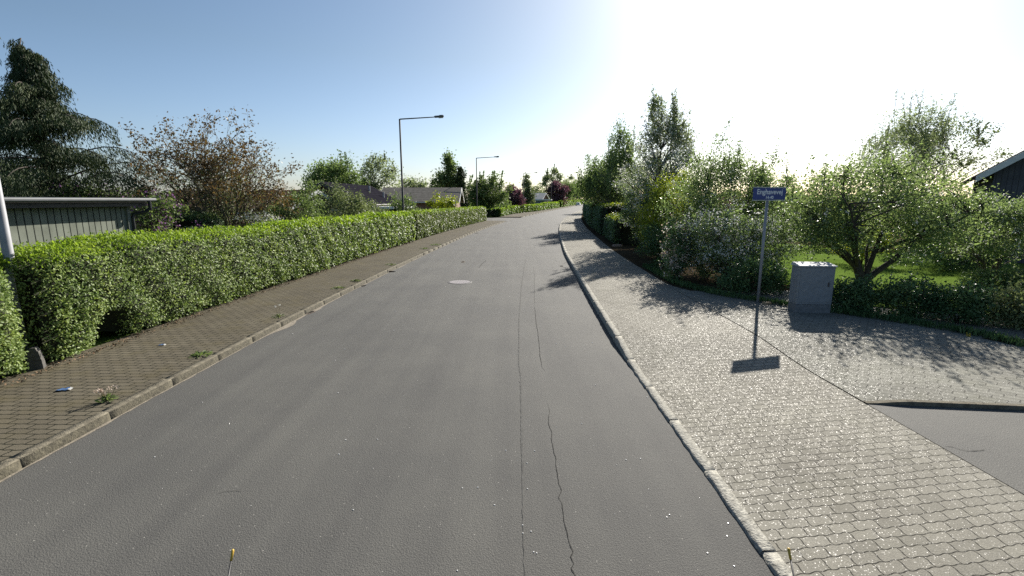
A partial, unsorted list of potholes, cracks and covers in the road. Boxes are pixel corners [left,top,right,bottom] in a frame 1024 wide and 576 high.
crack [548,406,576,576]
